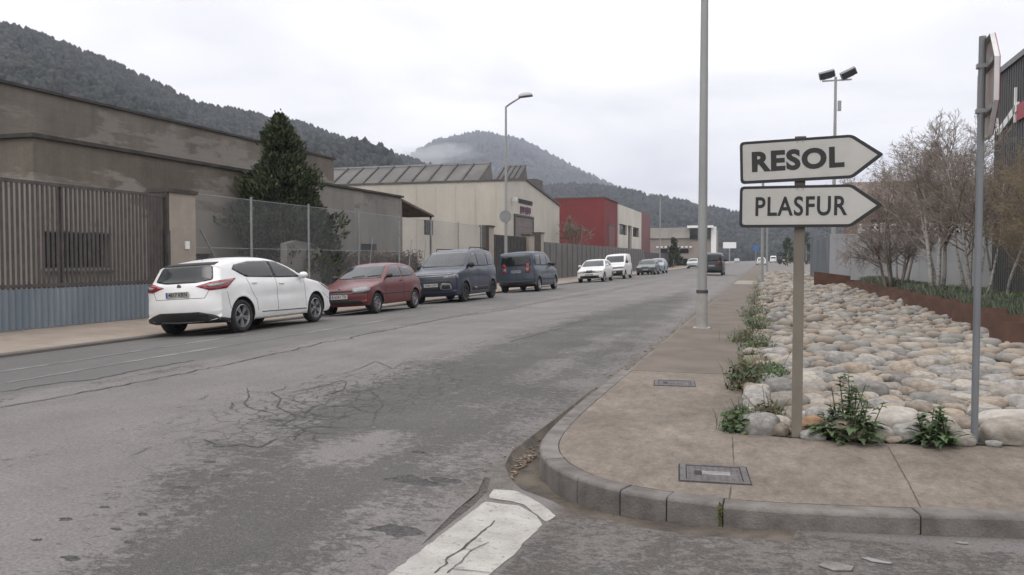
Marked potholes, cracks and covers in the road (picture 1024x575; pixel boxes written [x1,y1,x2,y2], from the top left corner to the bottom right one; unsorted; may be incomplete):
manhole cover [678,463,753,486]
crack [434,520,495,573]
manhole cover [653,379,696,387]
pothole [364,524,425,537]
crack [204,361,404,447]
